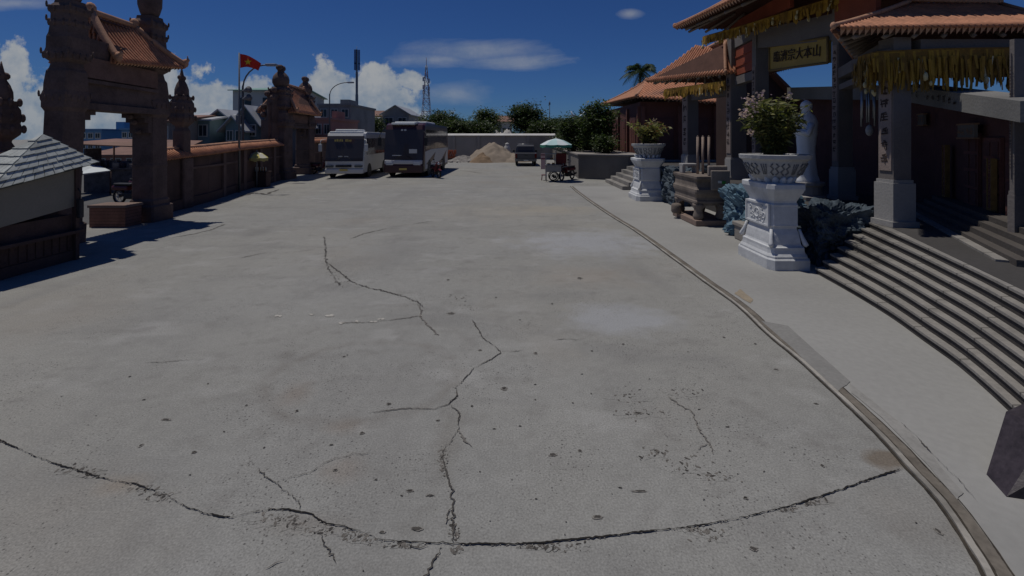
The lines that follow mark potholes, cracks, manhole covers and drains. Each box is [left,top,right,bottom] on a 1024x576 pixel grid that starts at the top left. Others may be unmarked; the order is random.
crack [245,237,439,335]
crack [0,322,899,576]
